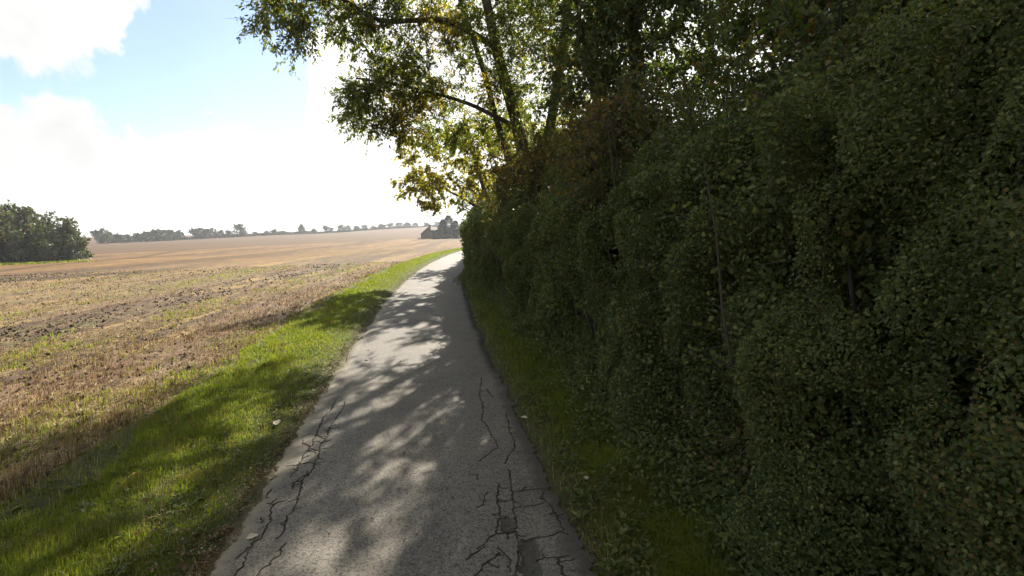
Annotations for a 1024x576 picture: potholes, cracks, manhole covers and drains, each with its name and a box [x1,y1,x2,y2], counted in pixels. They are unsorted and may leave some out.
crack [234,400,345,576]
crack [466,378,575,576]
pothole [499,515,516,534]
